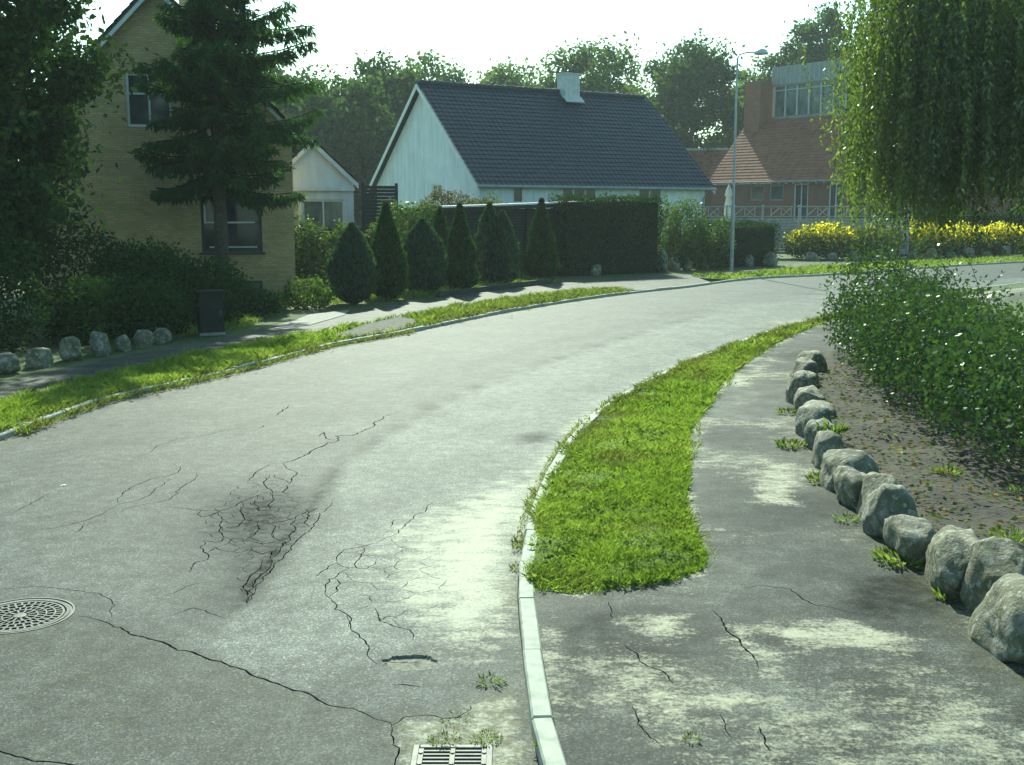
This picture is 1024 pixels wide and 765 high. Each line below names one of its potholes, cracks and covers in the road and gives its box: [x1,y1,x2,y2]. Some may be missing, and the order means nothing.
crack [632,706,662,746]
crack [38,464,198,532]
crack [624,644,674,684]
crack [294,411,399,461]
drain grate [410,745,493,765]
crack [748,585,848,612]
crack [317,501,447,664]
crack [713,610,759,668]
crack [6,587,471,765]
manhole cover [0,597,76,634]
crack [167,442,335,618]
pothole [381,654,438,671]
